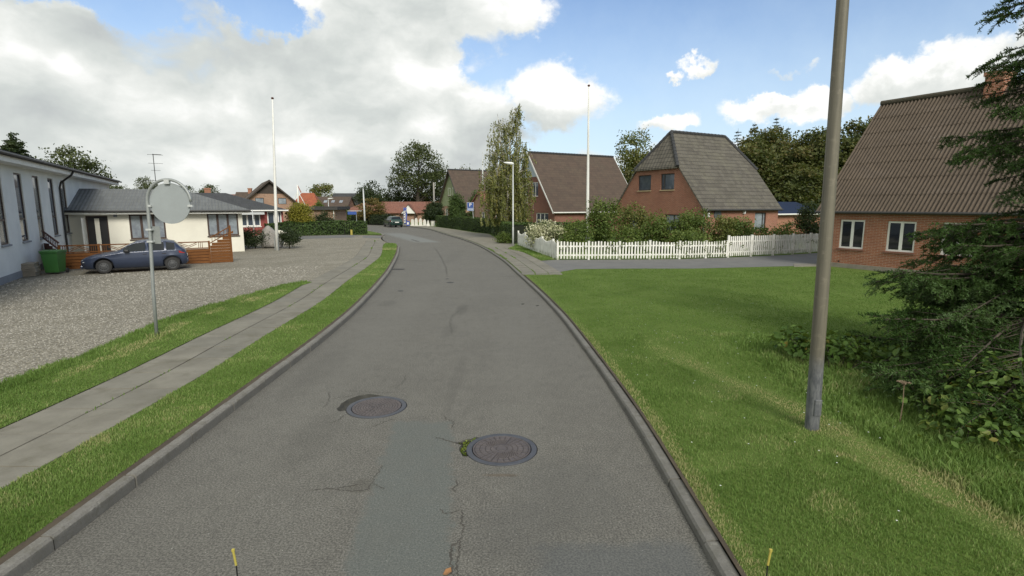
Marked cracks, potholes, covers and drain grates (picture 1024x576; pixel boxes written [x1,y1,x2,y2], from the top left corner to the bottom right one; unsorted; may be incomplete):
crack [310,465,385,491]
manhole cover [466,434,537,466]
manhole cover [346,396,407,419]
crack [440,509,465,576]
